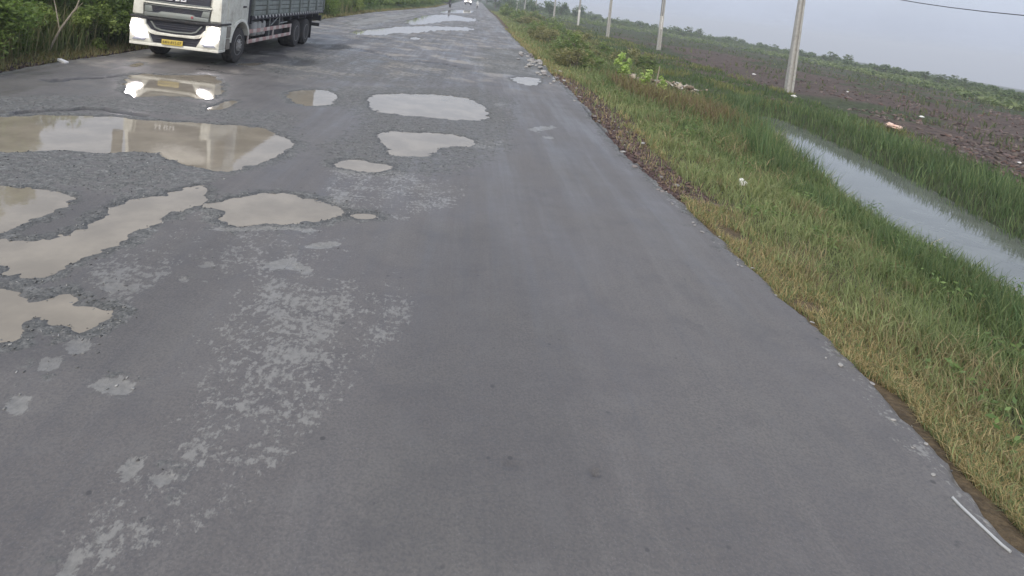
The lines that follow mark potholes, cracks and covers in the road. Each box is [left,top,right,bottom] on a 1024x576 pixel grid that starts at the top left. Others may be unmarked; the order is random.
pothole [342,25,481,37]
pothole [507,75,546,87]
pothole [401,14,483,25]
pothole [110,72,235,101]
pothole [0,182,224,285]
pothole [359,127,495,163]
pothole [0,111,312,177]
pothole [316,154,413,177]
pothole [349,91,505,125]
pothole [274,87,349,109]
pothole [0,279,130,349]
